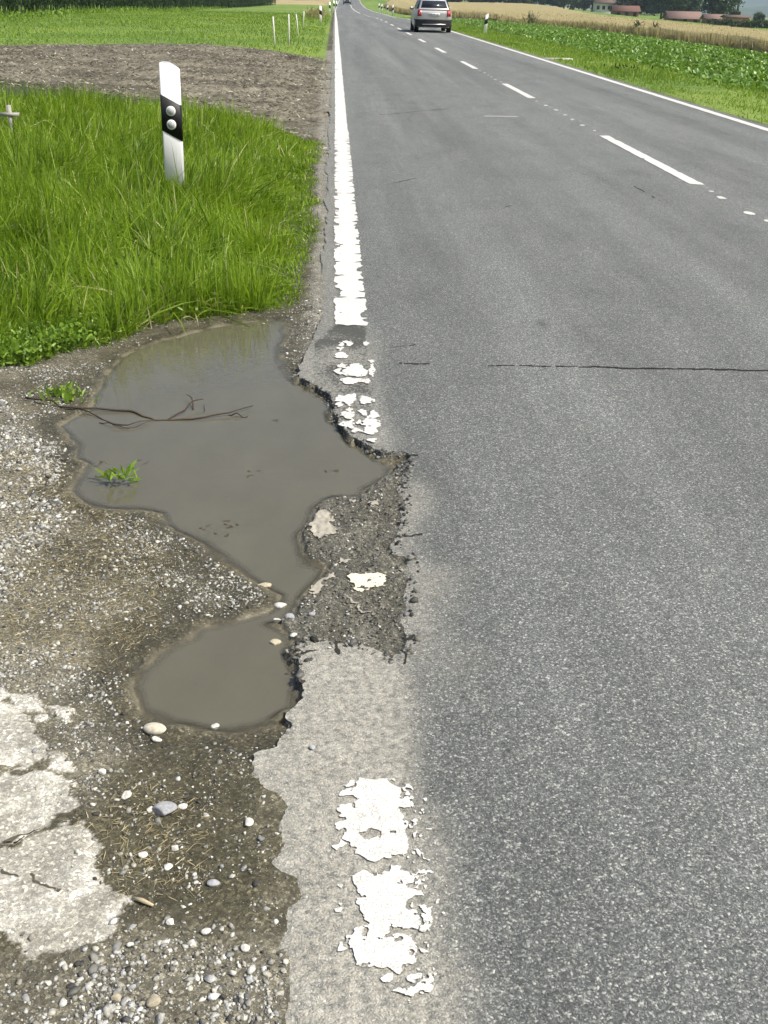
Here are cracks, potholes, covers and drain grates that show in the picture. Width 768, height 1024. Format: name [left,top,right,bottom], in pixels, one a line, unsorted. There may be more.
pothole [53,319,411,616]
pothole [286,459,409,658]
pothole [121,601,354,759]
crack [0,821,68,892]
crack [390,344,768,371]
